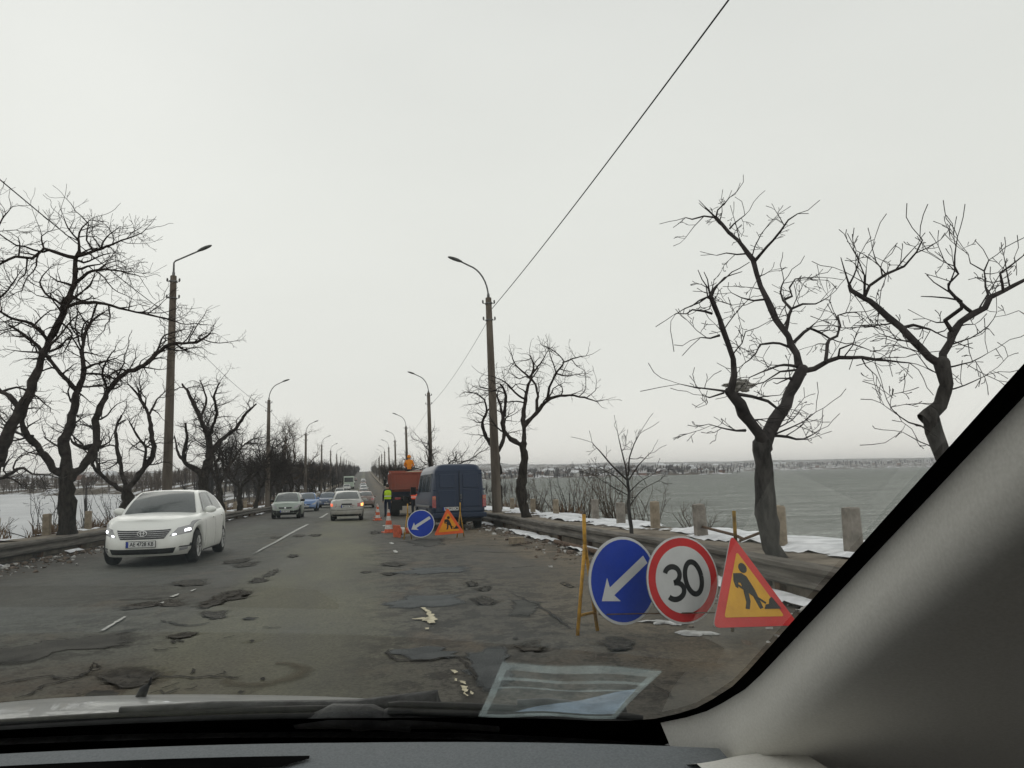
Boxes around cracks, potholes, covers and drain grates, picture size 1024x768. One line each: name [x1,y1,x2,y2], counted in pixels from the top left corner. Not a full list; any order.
pothole [201,610,228,619]
pothole [97,667,161,687]
pothole [198,589,244,608]
pothole [222,590,252,600]
pothole [476,596,497,605]
pothole [514,640,550,652]
pothole [120,601,160,609]
crack [151,668,239,694]
crack [516,595,568,627]
crack [0,669,90,702]
pothole [599,636,634,649]
